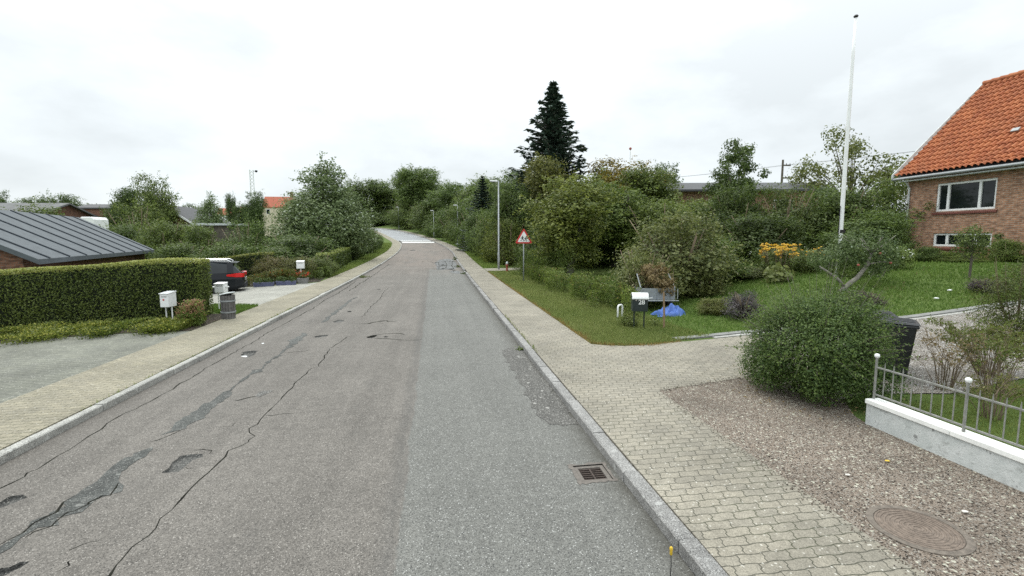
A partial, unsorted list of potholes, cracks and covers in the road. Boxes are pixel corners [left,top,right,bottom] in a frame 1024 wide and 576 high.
pothole [0,495,27,508]
manhole cover [865,505,976,557]
drain grate [574,465,612,482]
crack [0,265,402,576]
pothole [162,454,203,473]
